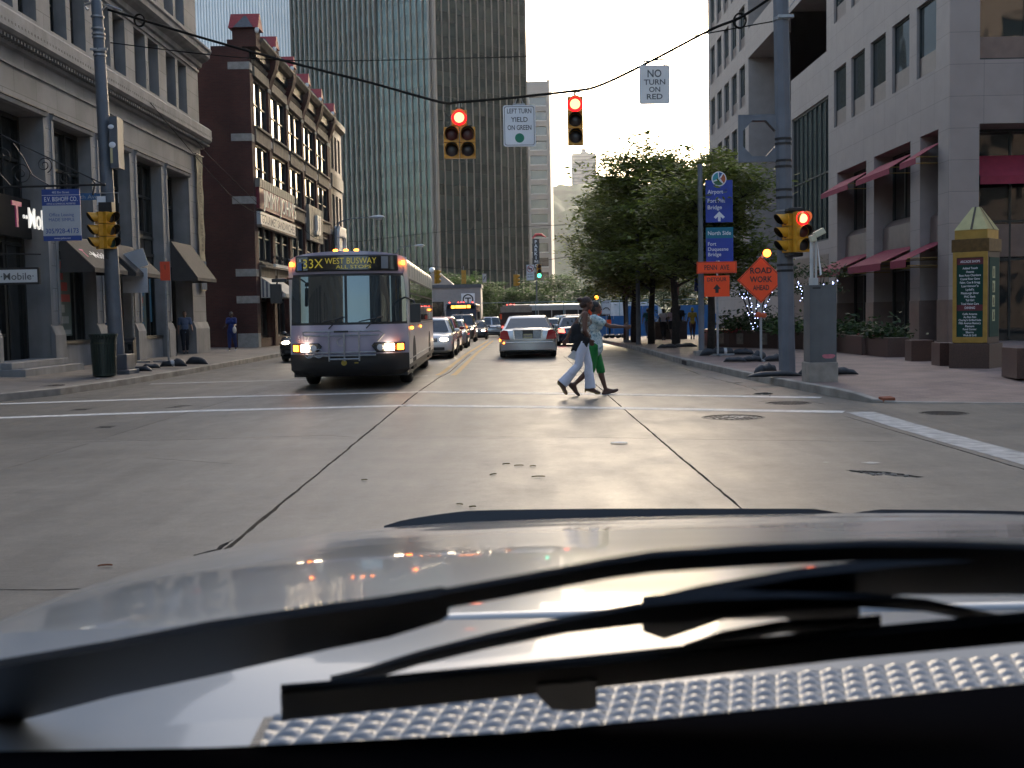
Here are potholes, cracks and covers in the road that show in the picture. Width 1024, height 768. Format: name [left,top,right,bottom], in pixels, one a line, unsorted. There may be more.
pothole [848,470,921,478]
